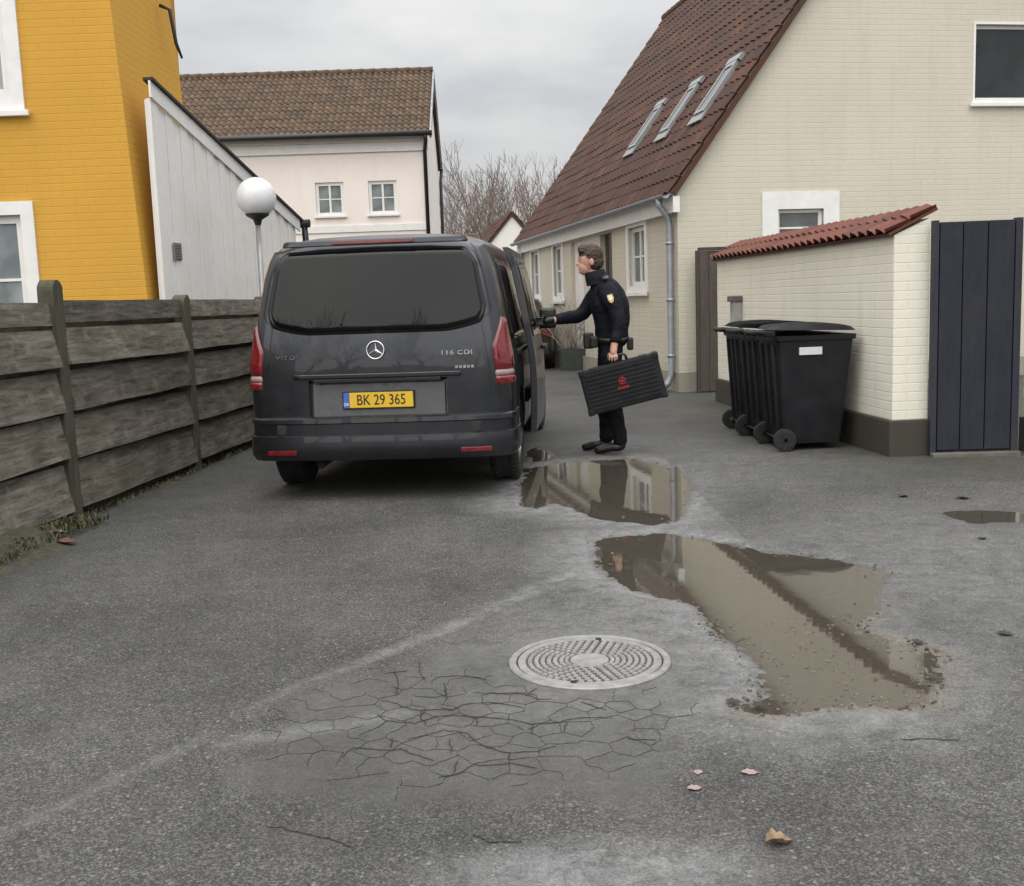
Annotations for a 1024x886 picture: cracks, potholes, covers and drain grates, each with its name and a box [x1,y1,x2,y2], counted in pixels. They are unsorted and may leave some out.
crack [264,661,695,800]
crack [266,826,353,847]
manhole cover [509,635,671,691]
